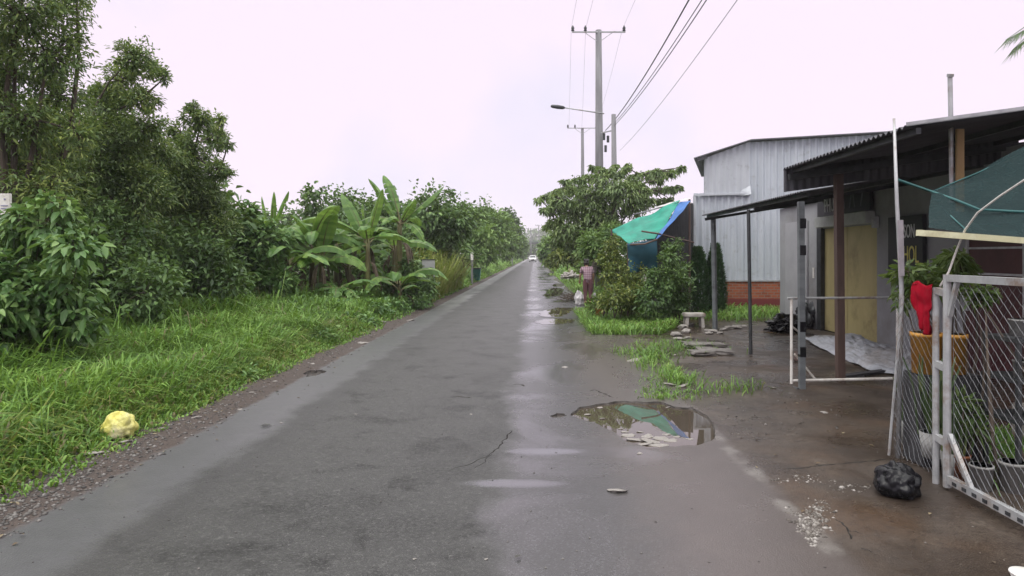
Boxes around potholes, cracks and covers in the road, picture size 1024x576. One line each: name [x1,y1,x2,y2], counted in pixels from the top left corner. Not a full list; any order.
pothole [571,401,715,448]
crack [453,431,512,469]
crack [787,459,886,469]
crack [837,520,877,554]
